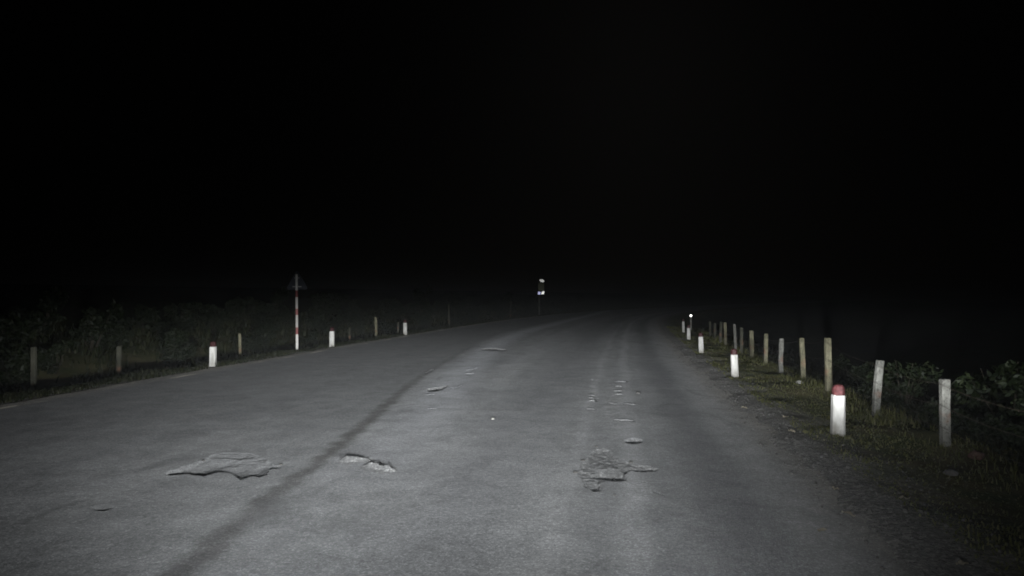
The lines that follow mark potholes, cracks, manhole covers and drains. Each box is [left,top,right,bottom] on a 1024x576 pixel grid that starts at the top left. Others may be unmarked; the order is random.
pothole [576,447,659,492]
pothole [165,452,282,480]
